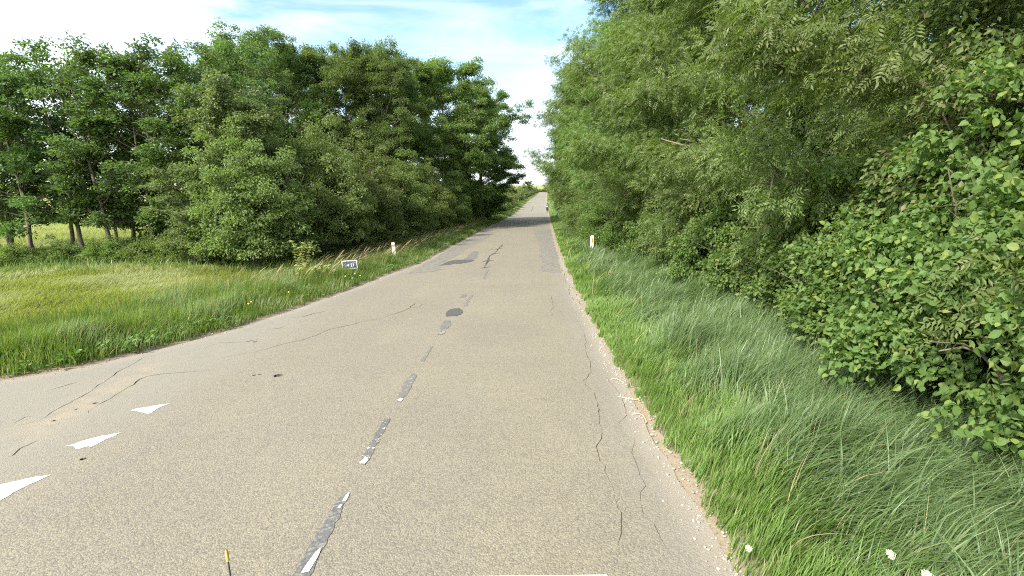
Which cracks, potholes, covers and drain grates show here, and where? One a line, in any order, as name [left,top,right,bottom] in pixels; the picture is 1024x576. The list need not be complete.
crack [583,336,679,564]
